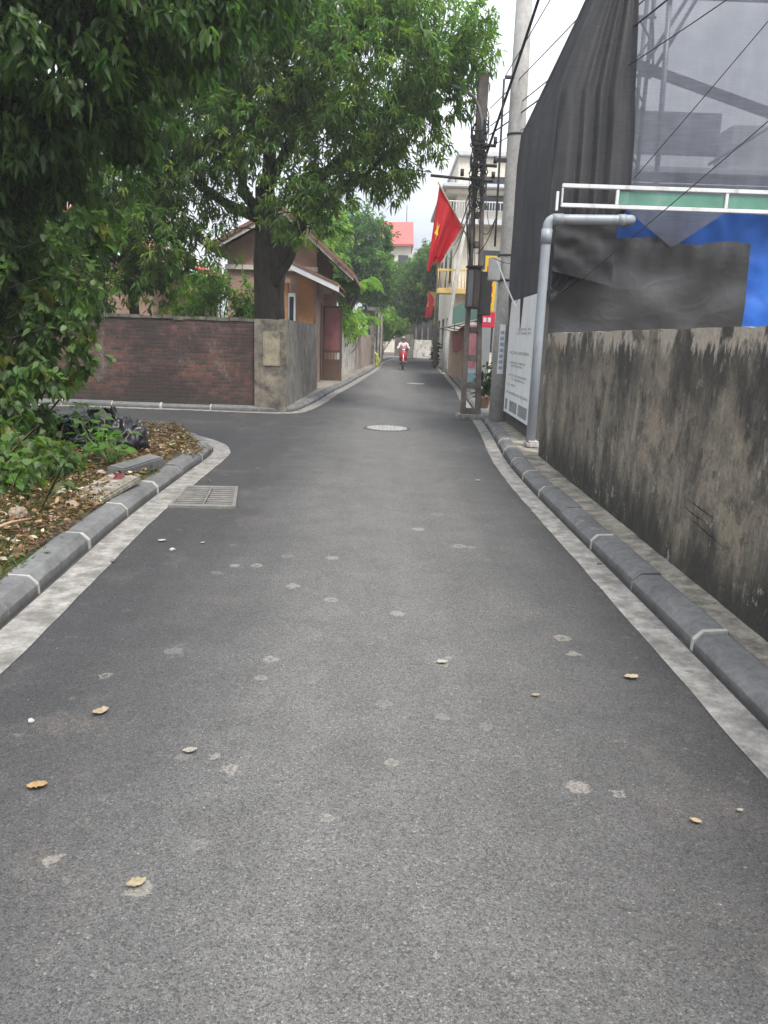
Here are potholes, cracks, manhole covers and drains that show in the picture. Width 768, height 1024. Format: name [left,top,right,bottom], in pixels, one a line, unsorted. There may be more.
drain grate [168,485,238,509]
